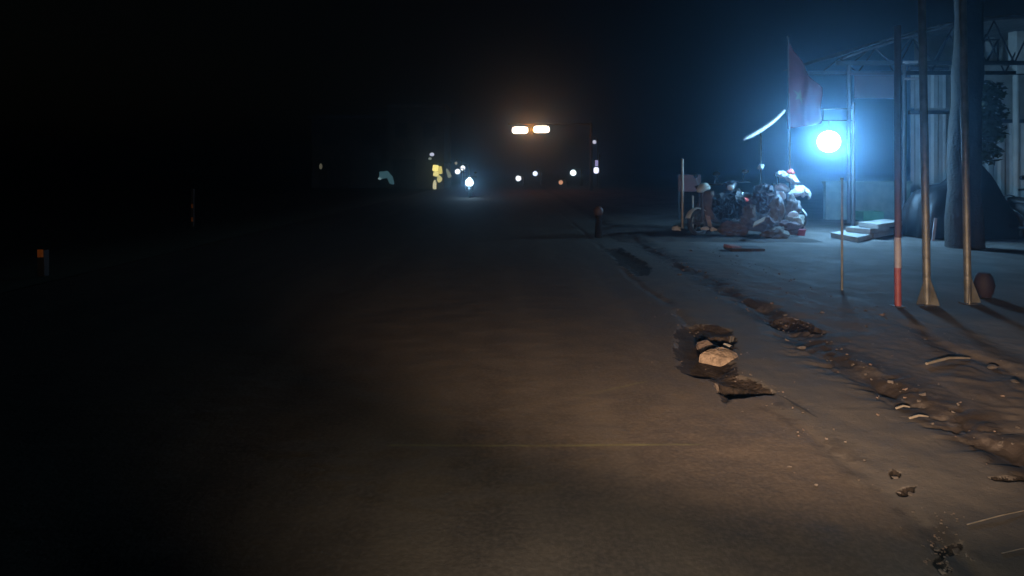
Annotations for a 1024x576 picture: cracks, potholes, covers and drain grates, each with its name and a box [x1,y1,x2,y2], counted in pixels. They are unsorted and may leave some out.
pothole [664,322,789,411]
pothole [759,316,835,338]
pothole [980,473,1024,486]
pothole [879,467,910,482]
pothole [923,538,976,576]
pothole [598,247,659,279]
pothole [889,484,925,500]
